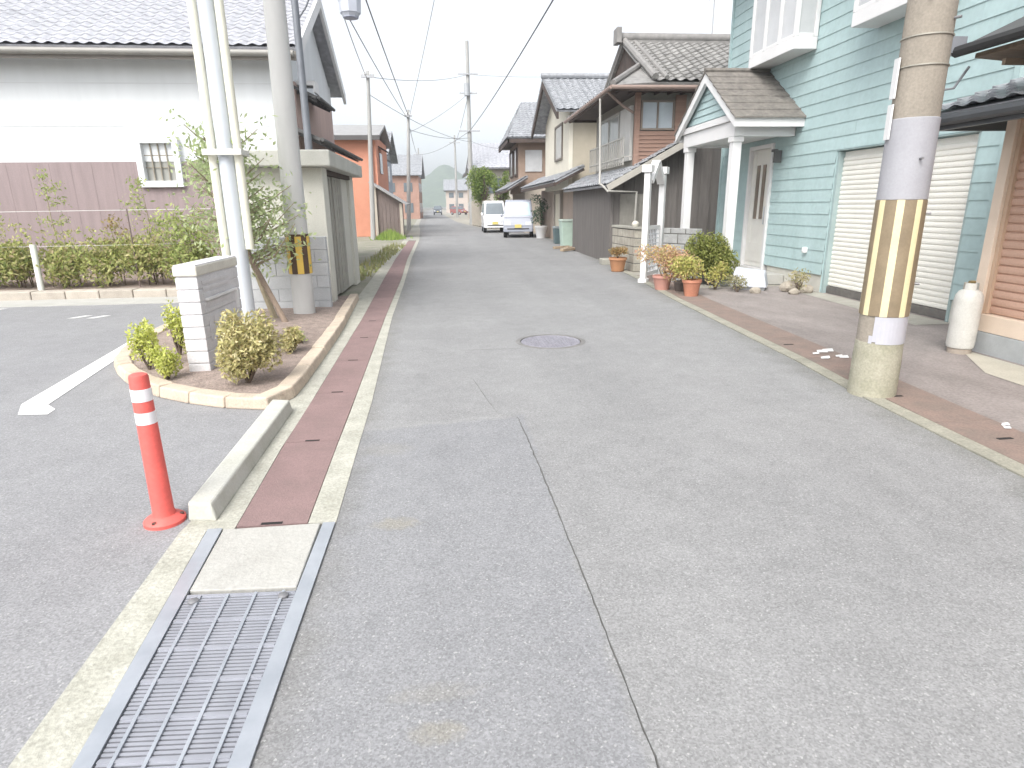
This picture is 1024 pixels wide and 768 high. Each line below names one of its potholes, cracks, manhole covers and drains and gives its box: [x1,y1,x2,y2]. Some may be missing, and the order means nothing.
manhole cover [516,334,586,349]
drain grate [71,522,335,768]
crack [475,382,660,768]
